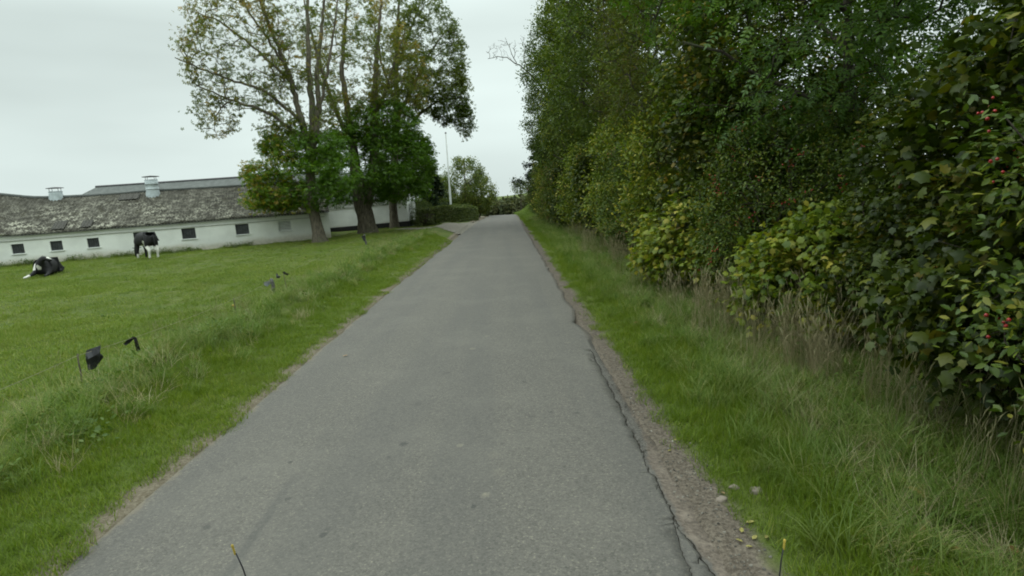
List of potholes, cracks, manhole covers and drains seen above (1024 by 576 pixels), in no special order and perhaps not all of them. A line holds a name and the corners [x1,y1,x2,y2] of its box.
crack [593,354,715,576]
